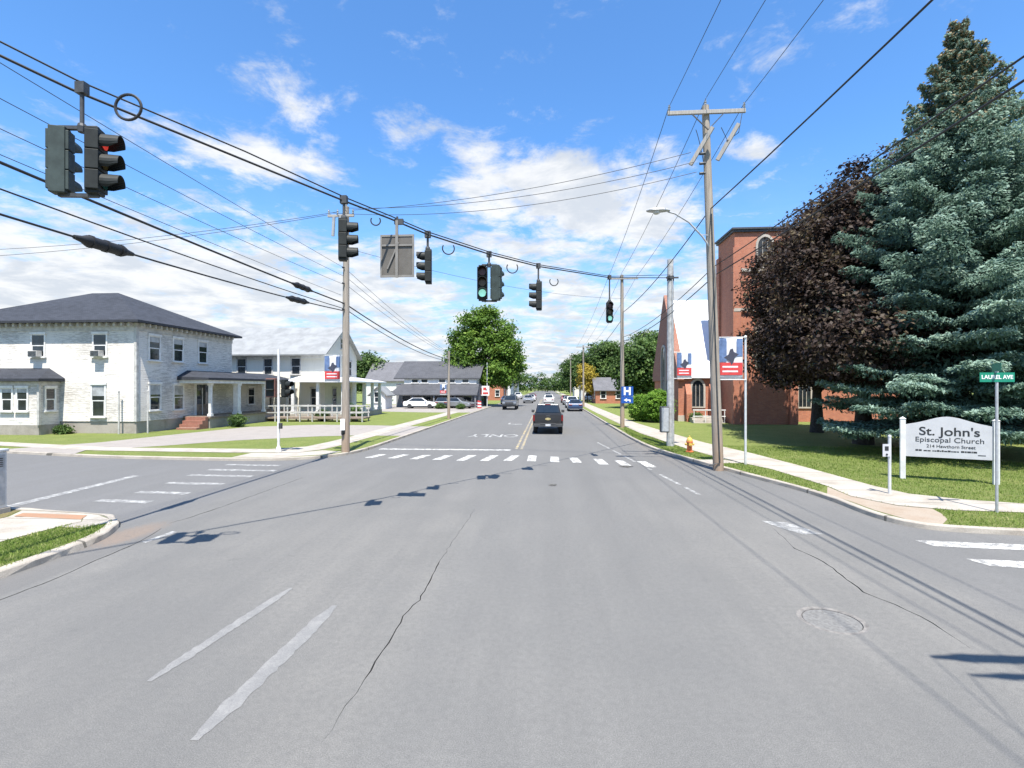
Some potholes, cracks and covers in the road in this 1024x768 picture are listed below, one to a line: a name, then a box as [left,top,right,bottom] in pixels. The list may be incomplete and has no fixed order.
crack [321,509,475,743]
manhole cover [796,607,869,635]
crack [777,532,970,648]
